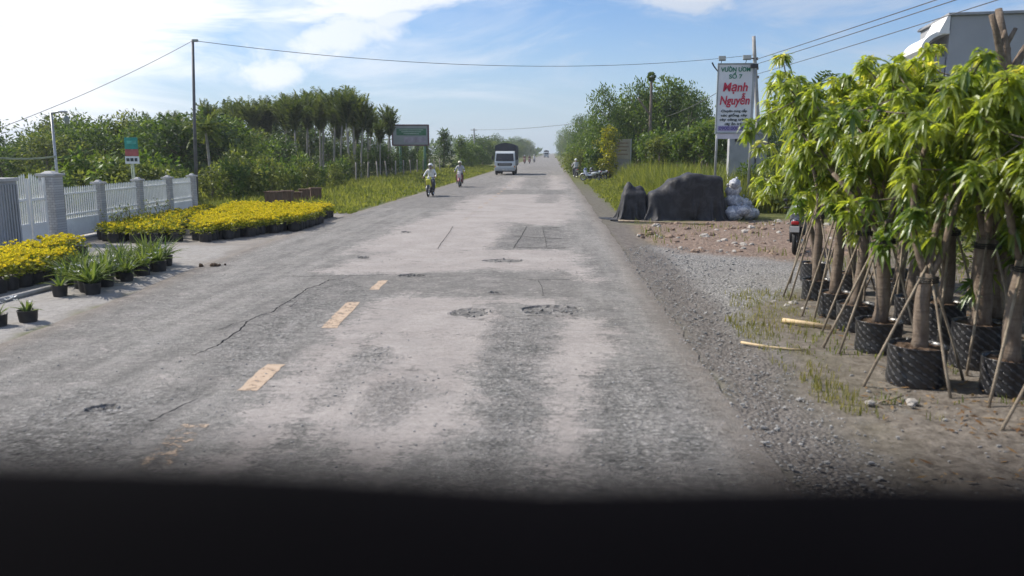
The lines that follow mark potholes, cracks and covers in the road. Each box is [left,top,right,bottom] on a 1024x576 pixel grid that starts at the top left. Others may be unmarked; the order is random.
pothole [70,401,131,415]
crack [149,398,201,421]
pothole [441,306,497,319]
pothole [508,304,599,316]
crack [525,279,572,295]
crack [192,274,392,355]
